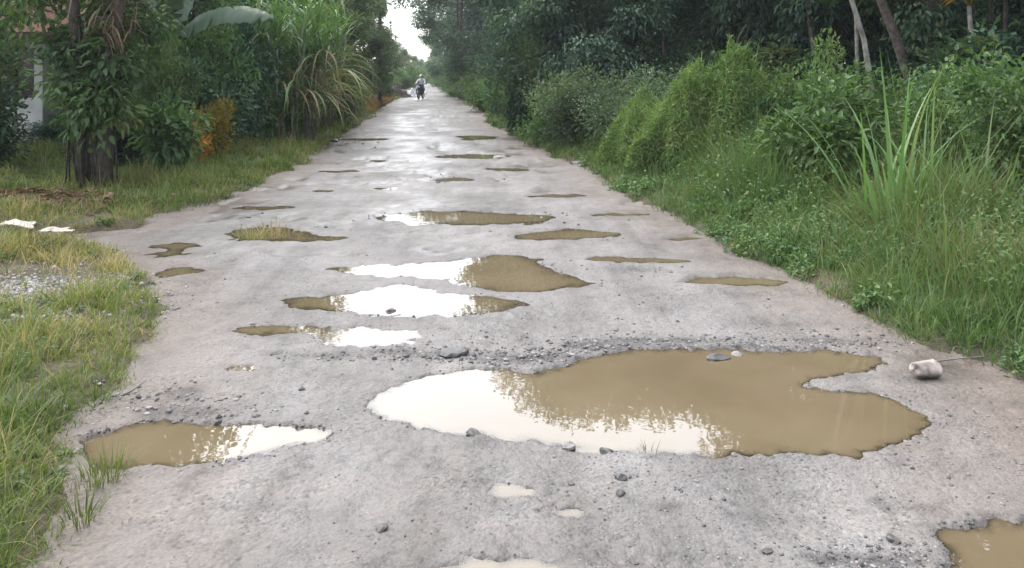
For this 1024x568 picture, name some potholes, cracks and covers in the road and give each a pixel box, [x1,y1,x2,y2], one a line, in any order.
pothole [195,221,380,249]
pothole [250,277,553,324]
pothole [111,236,236,261]
pothole [504,191,613,202]
pothole [297,248,631,297]
pothole [384,139,537,163]
pothole [342,337,968,474]
pothole [411,174,499,184]
pothole [483,222,648,247]
pothole [131,261,232,282]
pothole [656,270,812,293]
